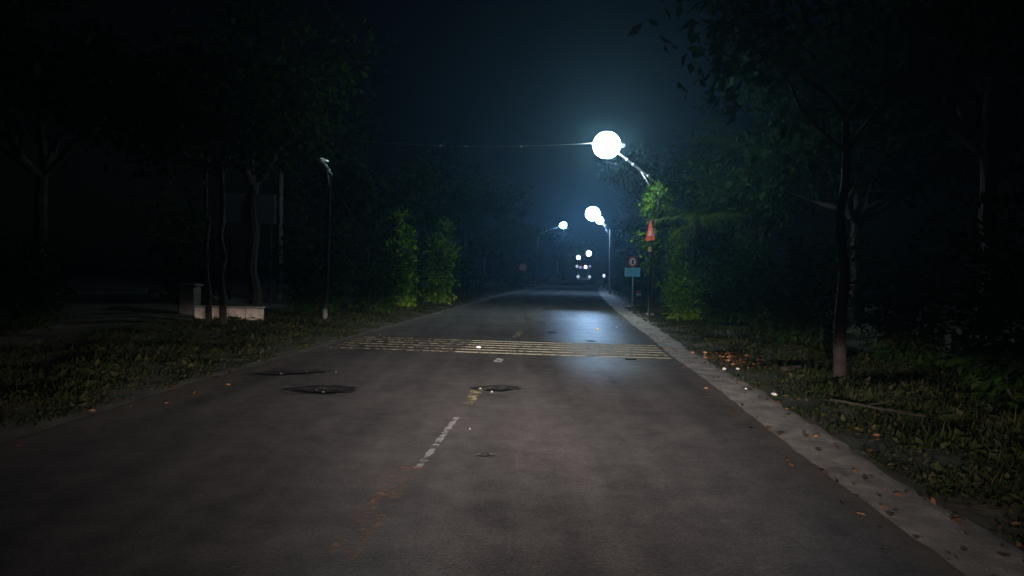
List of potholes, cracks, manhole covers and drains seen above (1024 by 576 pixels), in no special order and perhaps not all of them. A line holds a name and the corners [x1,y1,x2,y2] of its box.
pothole [279,385,359,395]
pothole [469,385,523,393]
